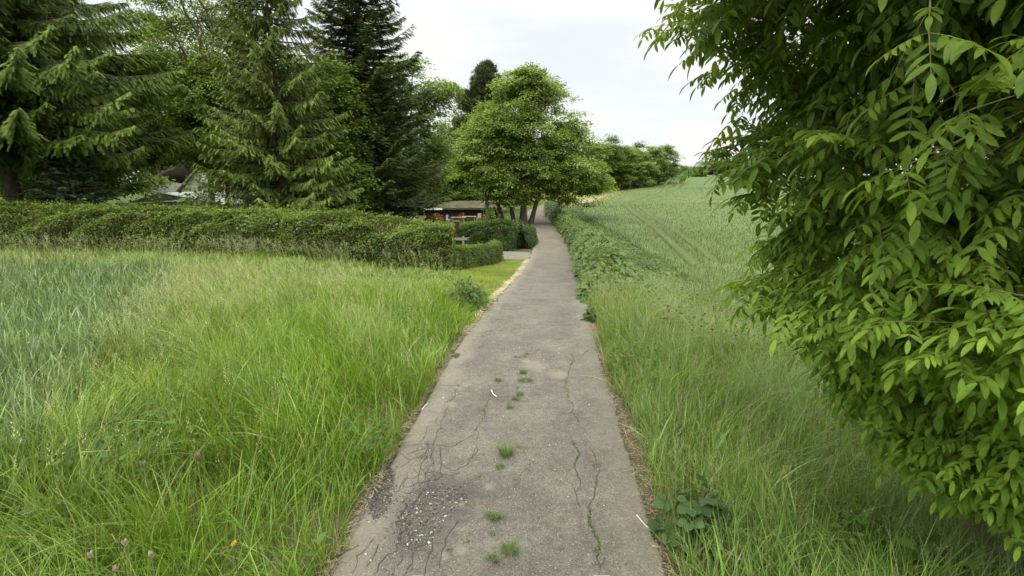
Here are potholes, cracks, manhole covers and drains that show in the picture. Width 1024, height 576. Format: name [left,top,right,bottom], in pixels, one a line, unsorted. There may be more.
crack [564,350,605,568]
crack [347,522,458,576]
pothole [379,481,477,554]
crack [392,385,479,503]
